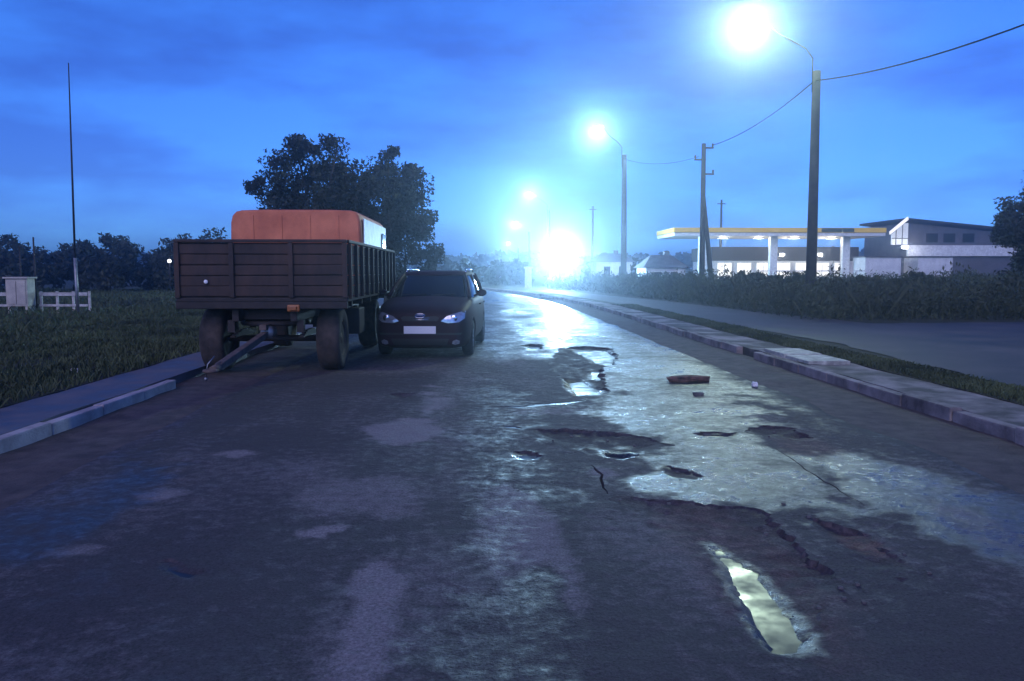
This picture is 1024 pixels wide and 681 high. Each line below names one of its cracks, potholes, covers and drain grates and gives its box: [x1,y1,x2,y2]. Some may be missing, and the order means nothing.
pothole [810,515,912,578]
crack [777,449,861,503]
pothole [744,425,814,443]
pothole [526,428,675,460]
pothole [548,346,619,396]
crack [591,465,608,494]
pothole [655,465,706,481]
pothole [510,450,545,461]
